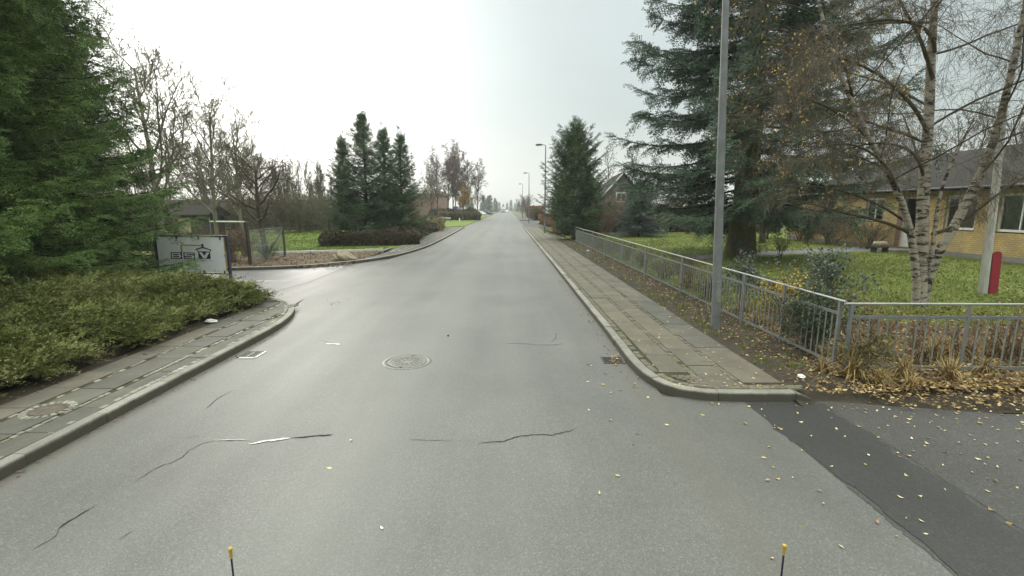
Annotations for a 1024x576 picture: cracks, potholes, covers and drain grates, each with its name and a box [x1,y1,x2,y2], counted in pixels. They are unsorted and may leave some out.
crack [479,428,576,444]
manhole cover [382,354,432,370]
drain grate [236,351,267,359]
manhole cover [17,401,78,420]
crack [31,504,97,550]
crack [140,434,333,478]
